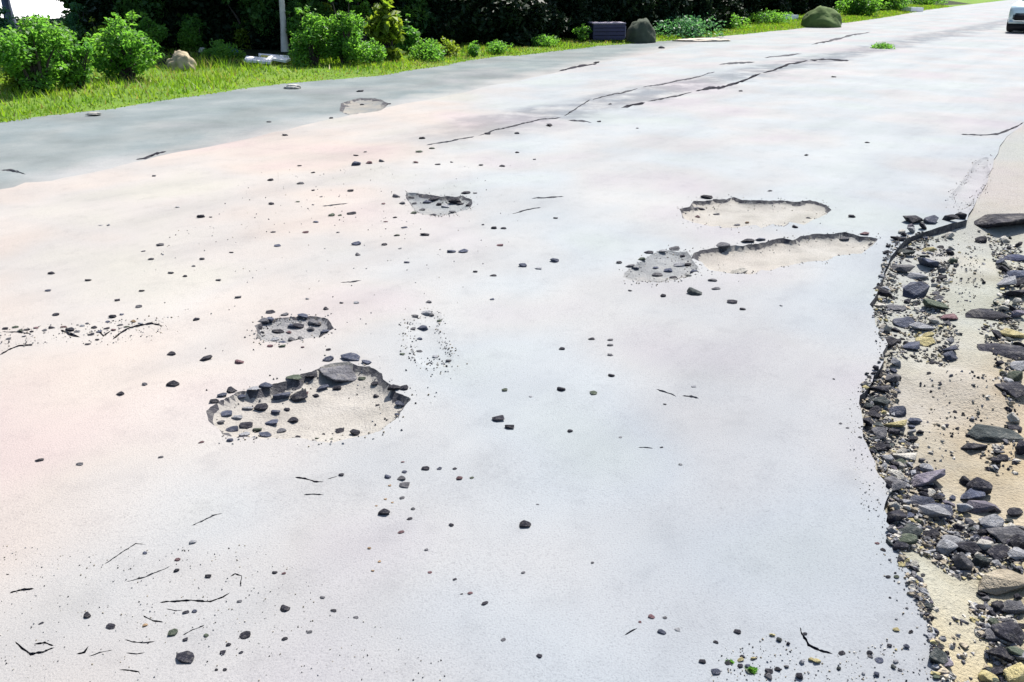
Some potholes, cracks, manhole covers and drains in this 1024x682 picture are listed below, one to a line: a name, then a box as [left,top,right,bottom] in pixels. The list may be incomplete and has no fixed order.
pothole [691,232,878,274]
crack [428,32,869,145]
crack [962,123,1022,136]
pothole [406,192,472,216]
pothole [340,98,388,115]
pothole [680,197,831,228]
crack [0,322,162,355]
pothole [624,250,698,283]
pothole [206,362,411,443]
pothole [255,316,334,343]
